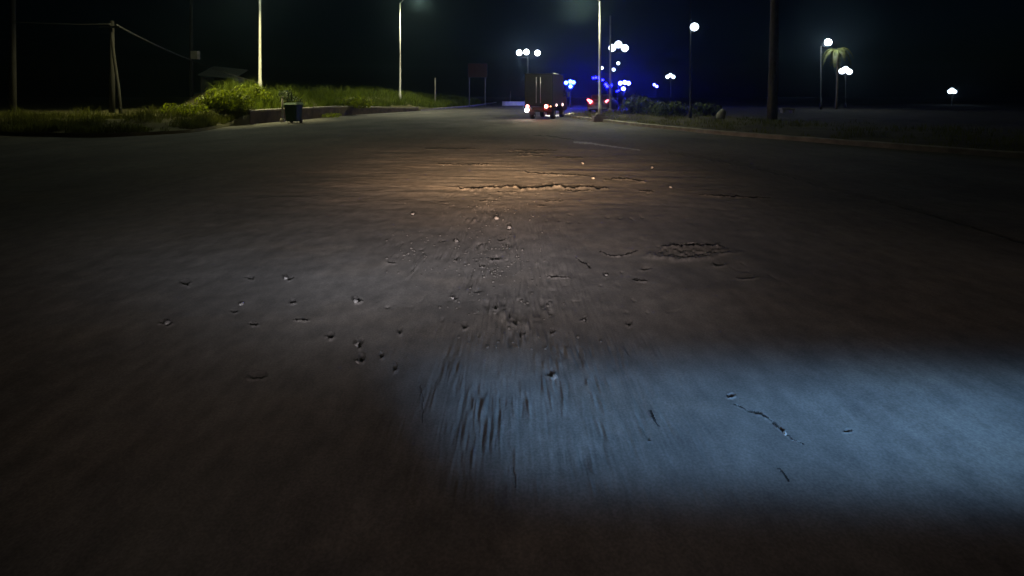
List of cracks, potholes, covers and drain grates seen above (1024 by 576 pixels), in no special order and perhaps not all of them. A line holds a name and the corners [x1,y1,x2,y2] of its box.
crack [426,135,654,202]
crack [550,250,638,278]
pothole [657,242,730,258]
crack [640,410,658,441]
crack [734,404,804,445]
pothole [247,370,269,379]
